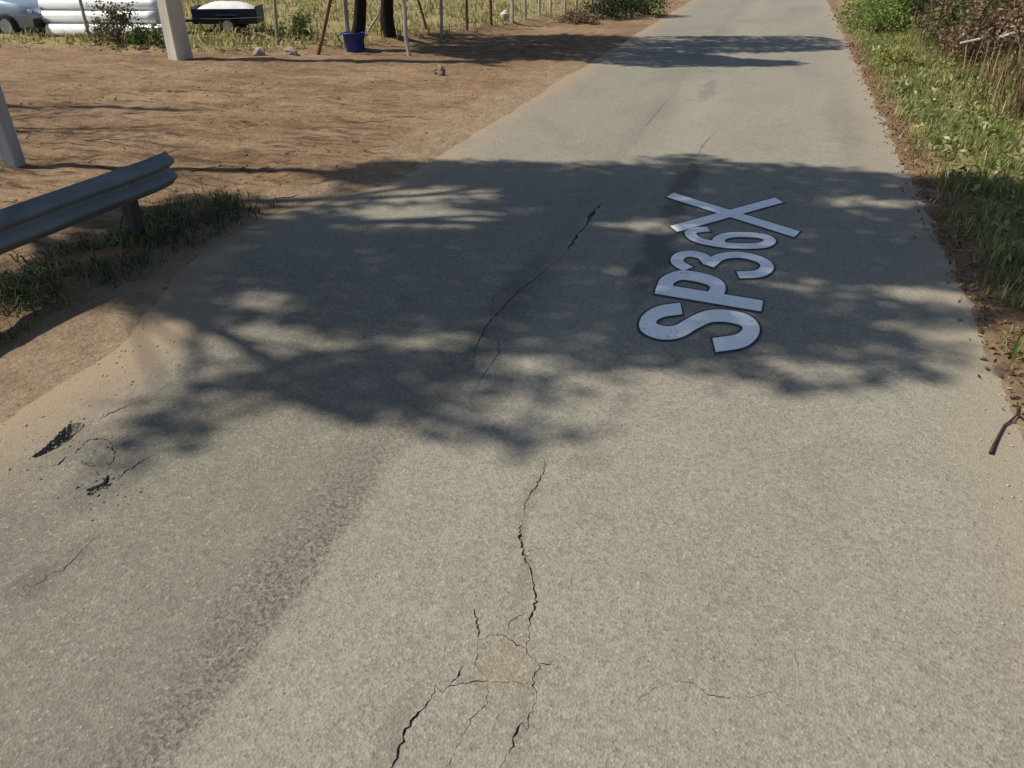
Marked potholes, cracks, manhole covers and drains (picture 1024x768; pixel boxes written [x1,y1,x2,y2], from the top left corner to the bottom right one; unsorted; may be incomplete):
crack [633,680,783,706]
crack [391,459,554,768]
crack [54,404,151,480]
pothole [32,422,85,458]
crack [24,535,101,587]
pothole [87,474,115,496]
crack [471,256,564,398]
